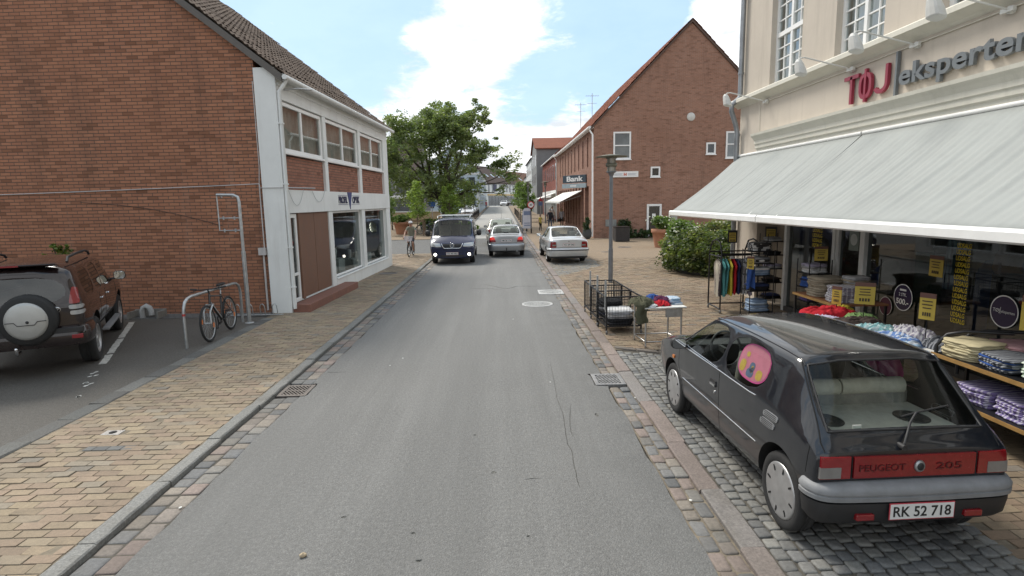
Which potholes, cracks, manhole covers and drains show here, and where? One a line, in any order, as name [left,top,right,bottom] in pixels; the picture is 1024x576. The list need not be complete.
drain grate [590,373,626,388]
drain grate [276,385,317,399]
crack [550,364,580,487]
